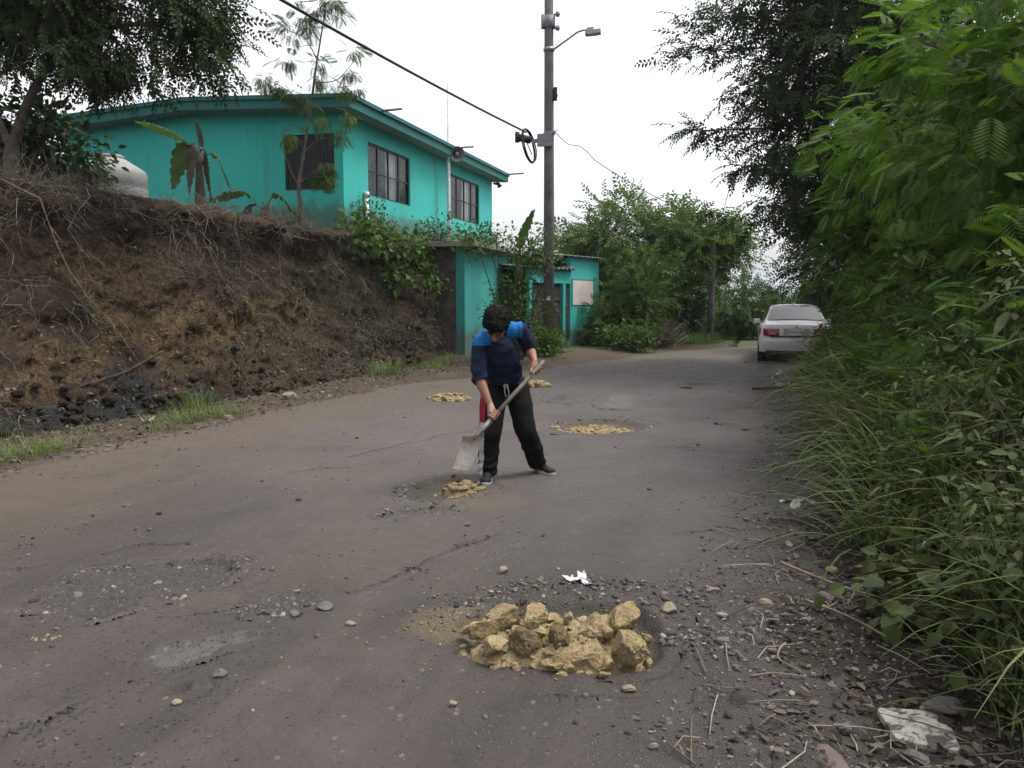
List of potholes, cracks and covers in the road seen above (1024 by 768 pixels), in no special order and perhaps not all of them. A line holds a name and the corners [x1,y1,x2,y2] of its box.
pothole [537,417,664,437]
crack [344,532,506,595]
crack [289,431,471,474]
pothole [441,594,684,683]
pothole [20,554,252,626]
pothole [389,474,499,504]
